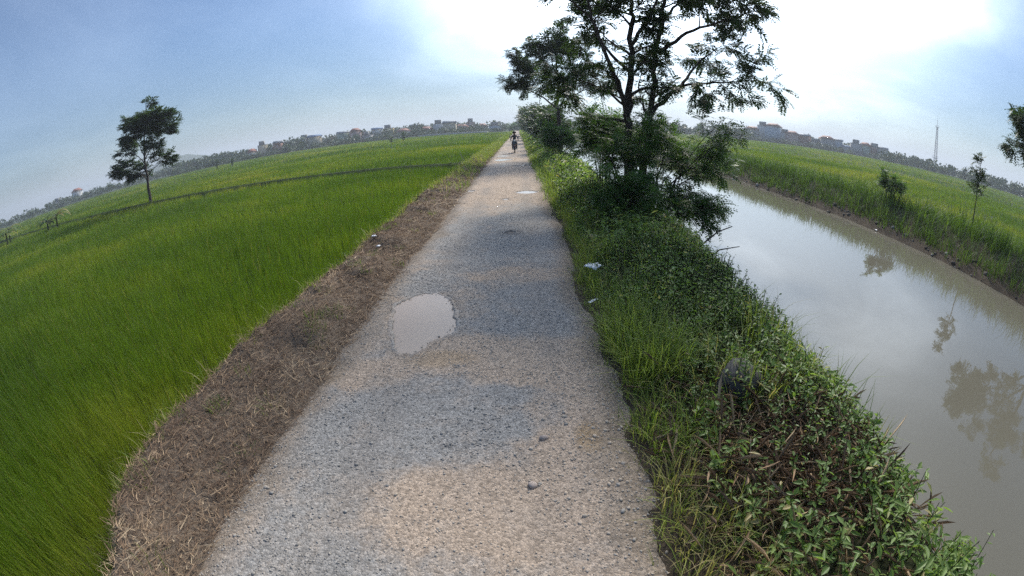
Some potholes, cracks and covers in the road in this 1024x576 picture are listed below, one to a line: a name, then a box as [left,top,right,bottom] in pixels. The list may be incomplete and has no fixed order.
pothole [386,291,462,357]
